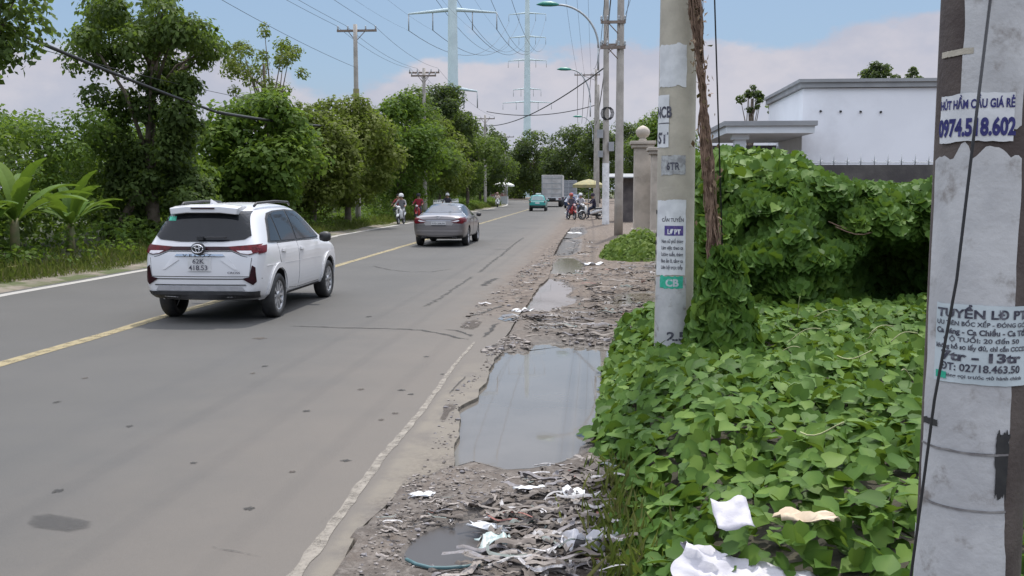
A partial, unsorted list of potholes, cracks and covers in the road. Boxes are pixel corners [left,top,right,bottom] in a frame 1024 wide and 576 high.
pothole [555,239,580,256]
pothole [526,277,584,312]
pothole [454,340,615,470]
pothole [564,228,584,239]
pothole [386,514,502,571]
crack [302,305,502,339]
